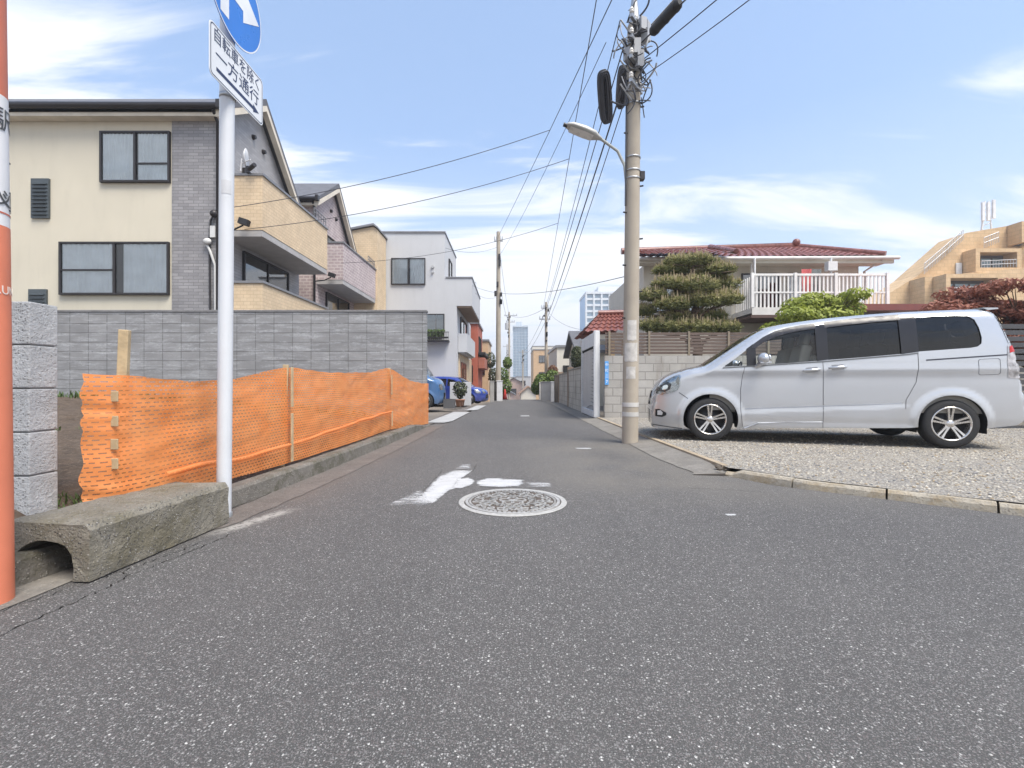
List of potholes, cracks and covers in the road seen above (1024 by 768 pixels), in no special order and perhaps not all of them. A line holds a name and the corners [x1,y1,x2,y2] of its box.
manhole cover [458,489,567,517]
crack [8,536,227,630]
